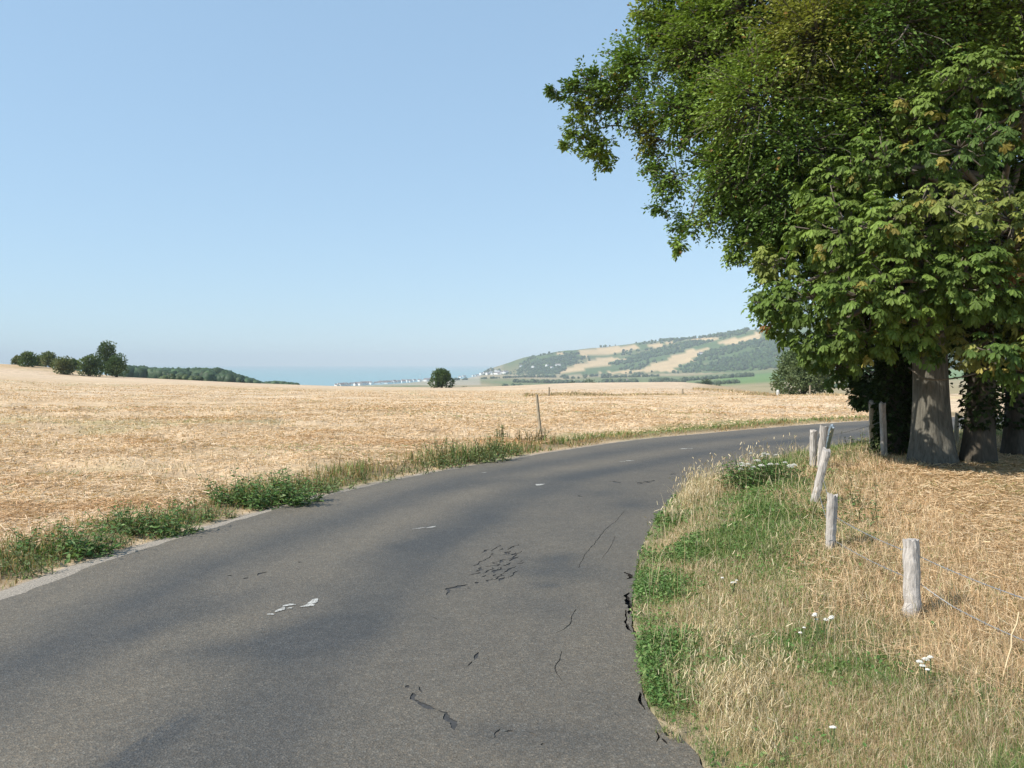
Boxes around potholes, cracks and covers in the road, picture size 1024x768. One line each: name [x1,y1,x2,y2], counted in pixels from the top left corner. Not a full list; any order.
crack [405,685,458,730]
crack [445,544,524,595]
